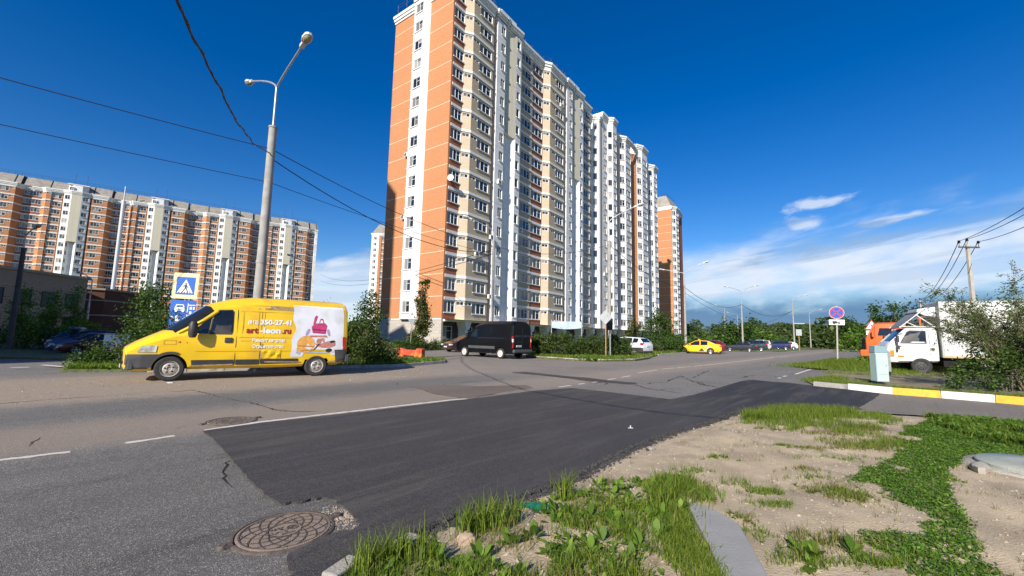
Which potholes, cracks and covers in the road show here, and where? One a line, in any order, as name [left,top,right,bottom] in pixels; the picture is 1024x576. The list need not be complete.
manhole cover [199,416,261,426]
crack [222,460,233,485]
manhole cover [216,511,342,555]
